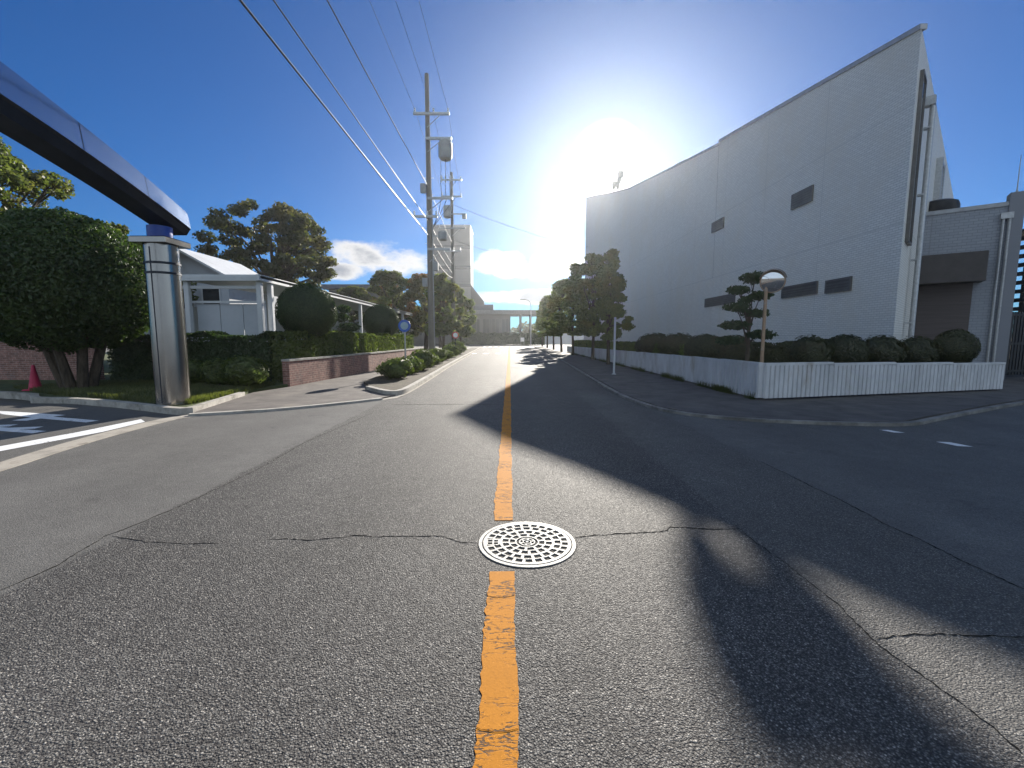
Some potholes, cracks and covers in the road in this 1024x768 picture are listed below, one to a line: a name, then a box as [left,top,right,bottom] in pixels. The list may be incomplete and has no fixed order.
crack [579,526,721,537]
crack [738,528,1024,755]
manhole cover [478,522,577,568]
crack [283,534,477,543]
